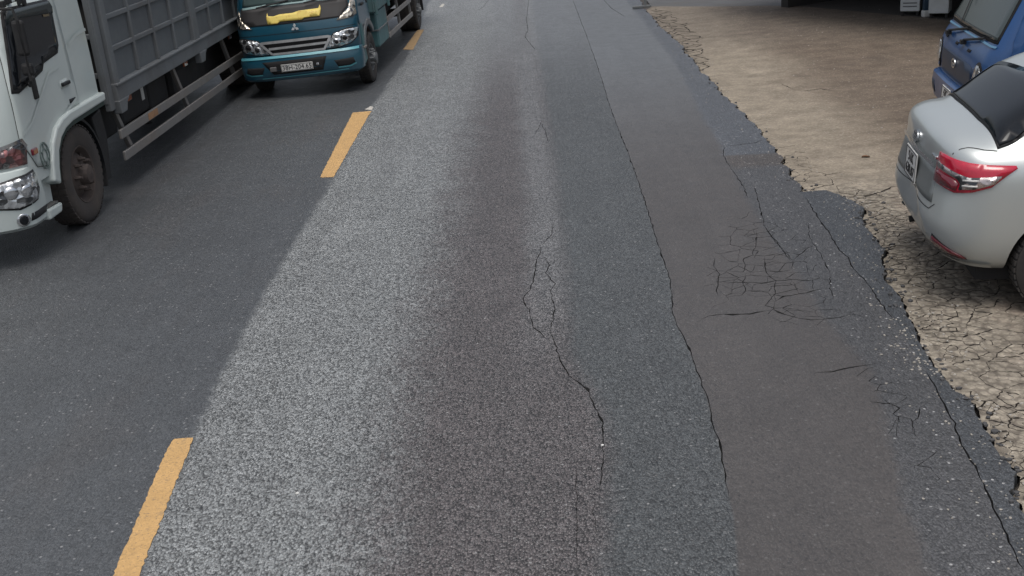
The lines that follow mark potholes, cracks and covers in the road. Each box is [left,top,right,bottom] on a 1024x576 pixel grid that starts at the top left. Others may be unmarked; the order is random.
crack [523,228,604,489]
crack [575,462,597,563]
crack [699,140,1024,570]
